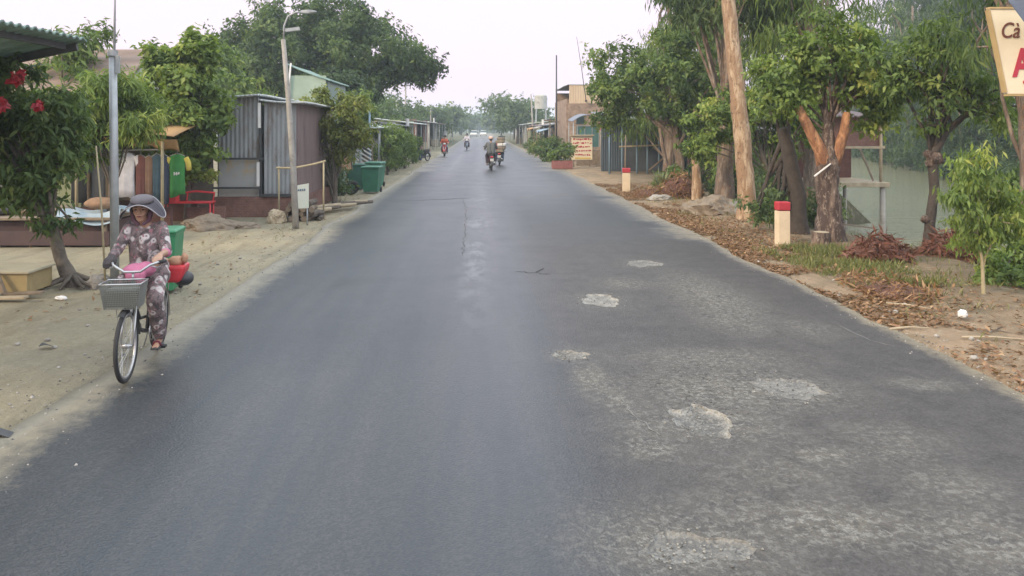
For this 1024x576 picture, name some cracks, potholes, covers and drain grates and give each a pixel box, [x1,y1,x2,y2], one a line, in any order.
pothole [664,401,745,439]
pothole [549,350,590,362]
pothole [748,371,829,404]
pothole [640,527,764,569]
pothole [577,294,628,307]
